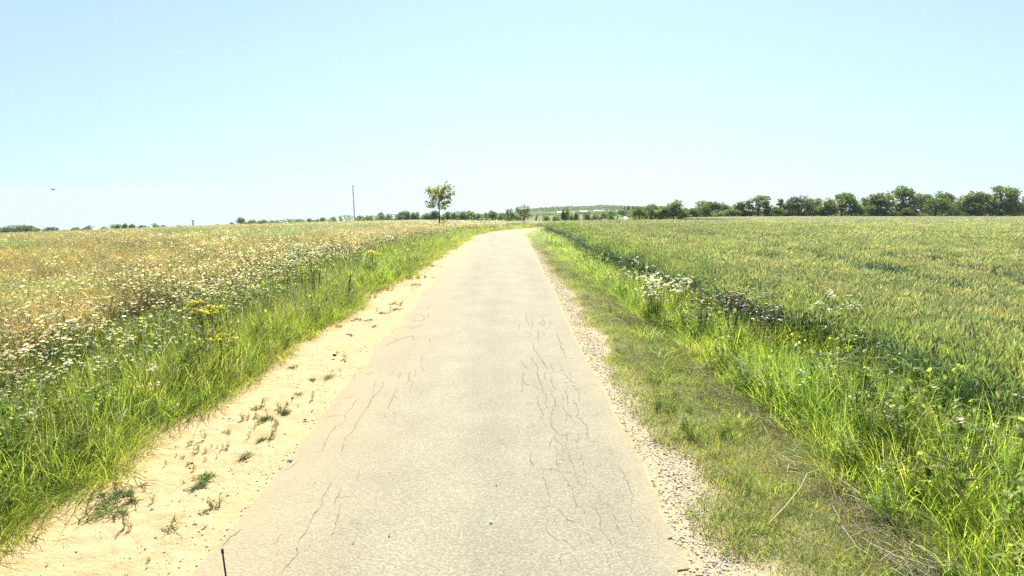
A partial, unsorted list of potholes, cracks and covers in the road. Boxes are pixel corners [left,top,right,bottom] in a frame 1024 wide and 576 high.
crack [518,311,633,571]
crack [322,313,430,455]
